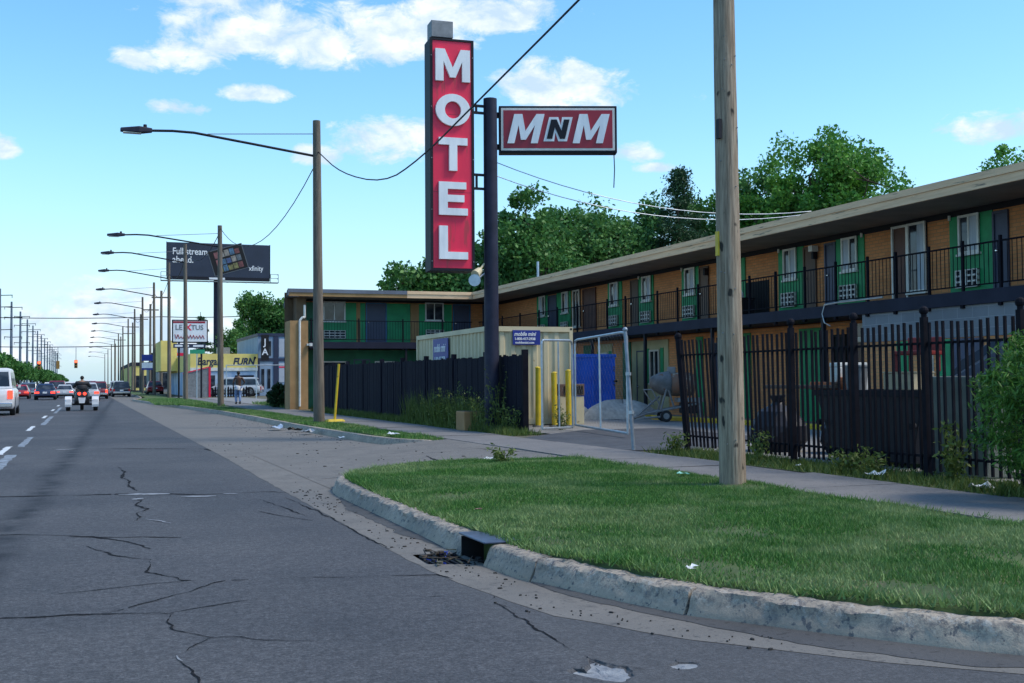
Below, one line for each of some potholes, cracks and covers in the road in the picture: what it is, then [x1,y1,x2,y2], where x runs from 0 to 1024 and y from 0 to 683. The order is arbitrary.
drain grate [416,531,515,588]
pothole [567,656,635,682]
crack [0,467,389,683]
